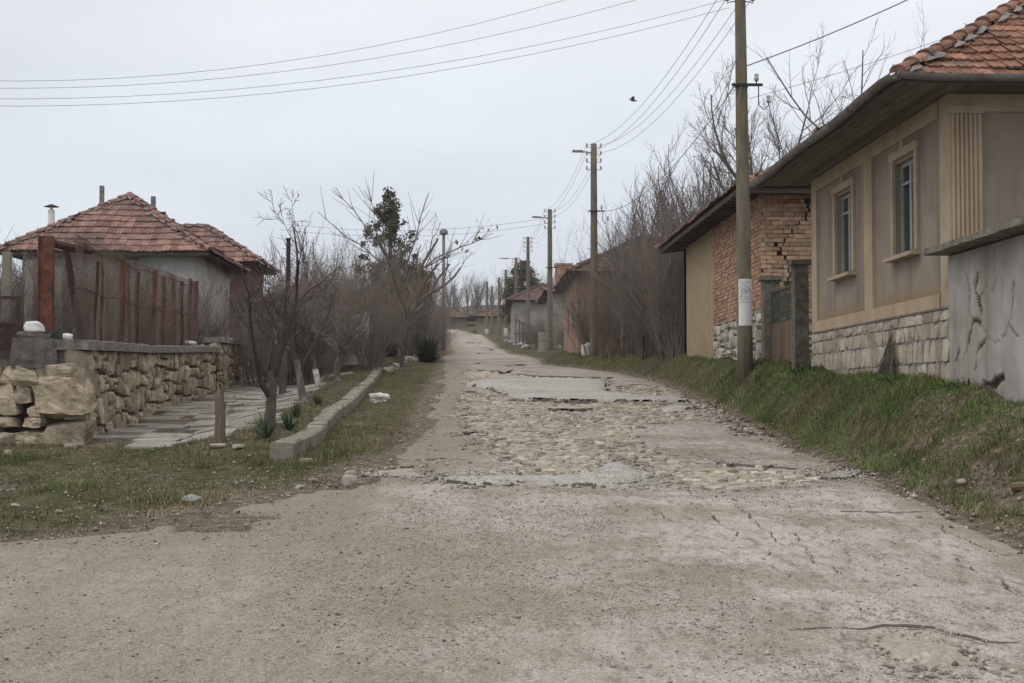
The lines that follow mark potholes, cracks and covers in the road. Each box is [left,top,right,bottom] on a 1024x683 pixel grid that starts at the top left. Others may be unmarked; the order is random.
crack [631,499,1024,652]
pothole [609,383,684,397]
pothole [444,390,713,475]
